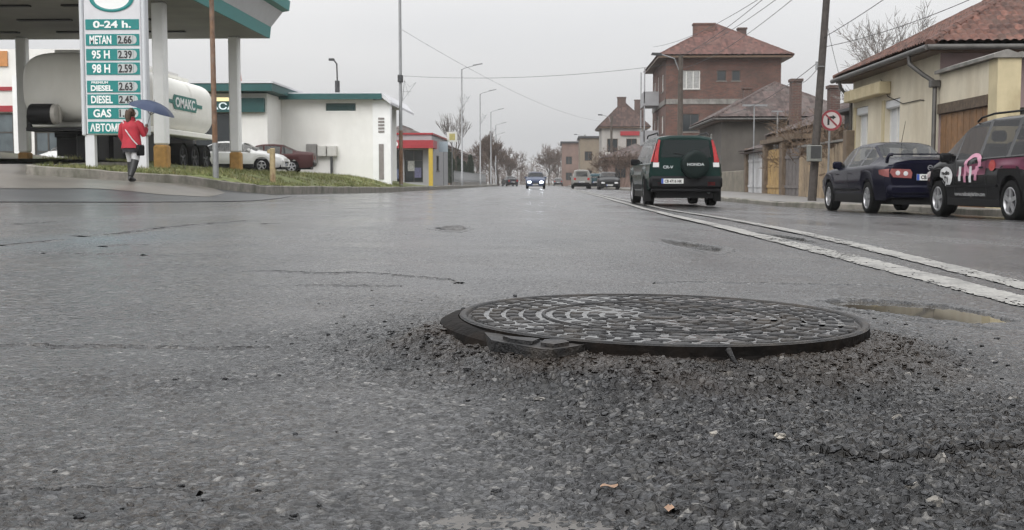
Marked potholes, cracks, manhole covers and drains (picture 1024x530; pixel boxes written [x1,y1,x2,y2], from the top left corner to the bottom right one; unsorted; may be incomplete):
pothole [653,237,736,255]
crack [246,270,464,287]
manhole cover [440,293,870,364]
pothole [793,296,1024,330]
pothole [426,225,474,233]
crack [0,220,290,255]
